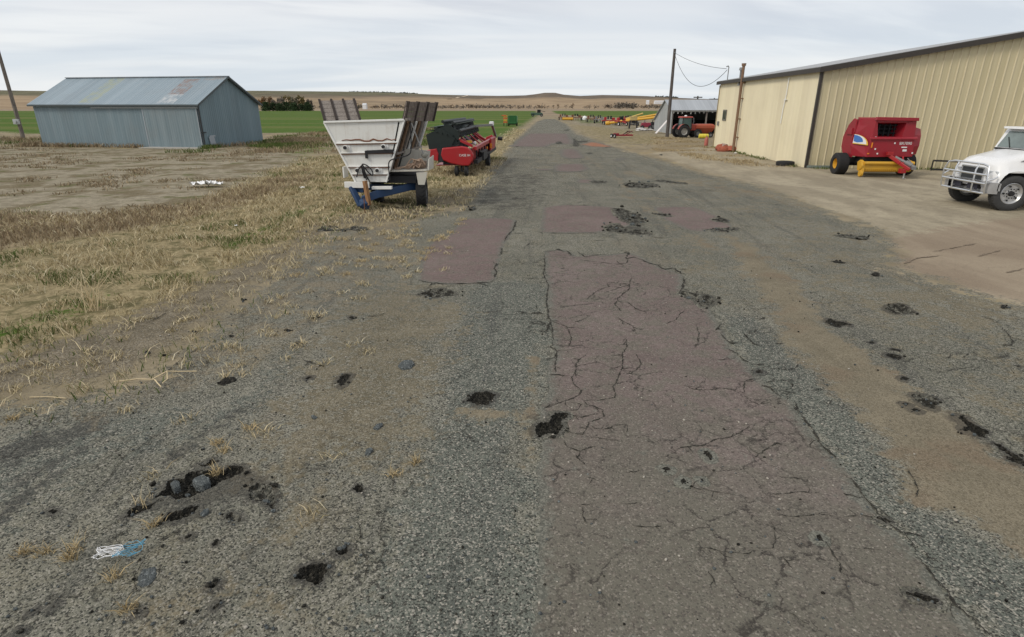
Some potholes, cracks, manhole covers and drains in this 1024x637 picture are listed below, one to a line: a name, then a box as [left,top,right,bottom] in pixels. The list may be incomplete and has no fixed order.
pothole [528,410,574,442]
pothole [146,463,251,507]
crack [668,310,1015,635]
pothole [240,479,284,515]
pothole [952,413,996,441]
pothole [611,208,647,224]
pothole [118,495,174,523]
pothole [285,557,337,593]
pothole [152,501,207,528]
